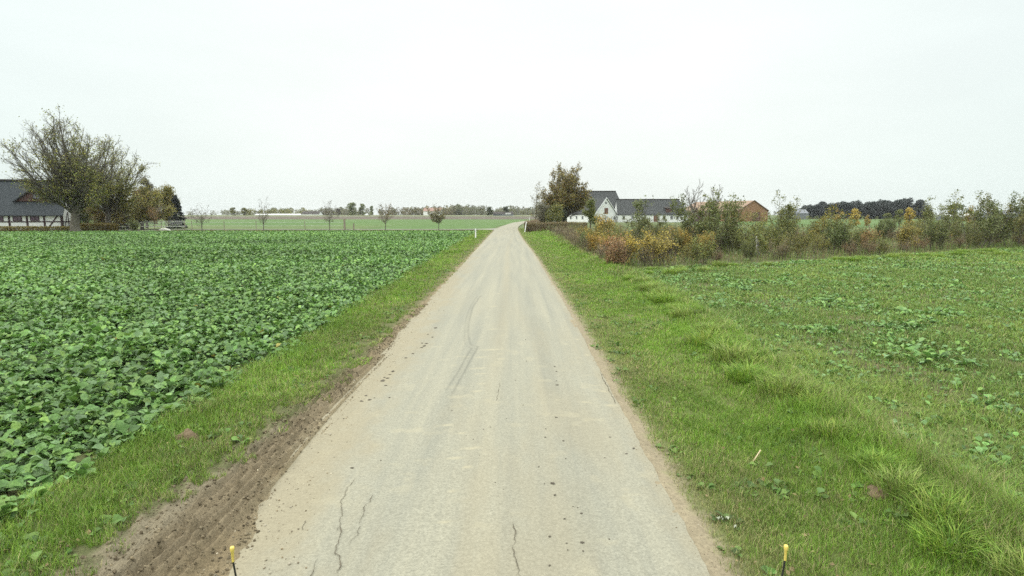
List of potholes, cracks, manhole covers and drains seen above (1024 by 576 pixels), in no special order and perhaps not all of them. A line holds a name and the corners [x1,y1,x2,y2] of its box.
crack [334,480,373,573]
